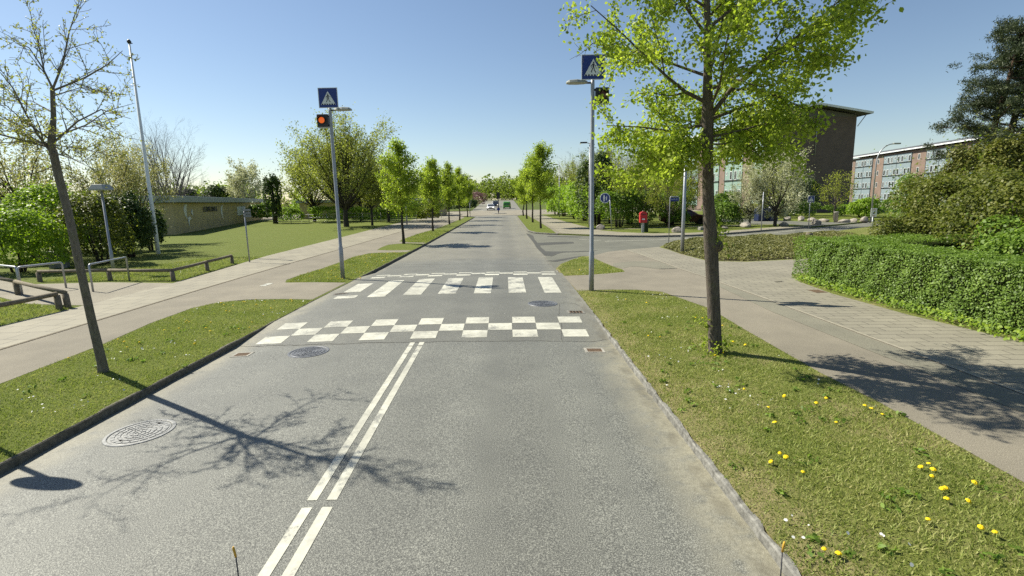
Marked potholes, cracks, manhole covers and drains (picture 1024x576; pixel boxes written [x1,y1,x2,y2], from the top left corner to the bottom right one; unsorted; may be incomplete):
manhole cover [287,346,330,358]
manhole cover [102,419,177,447]
